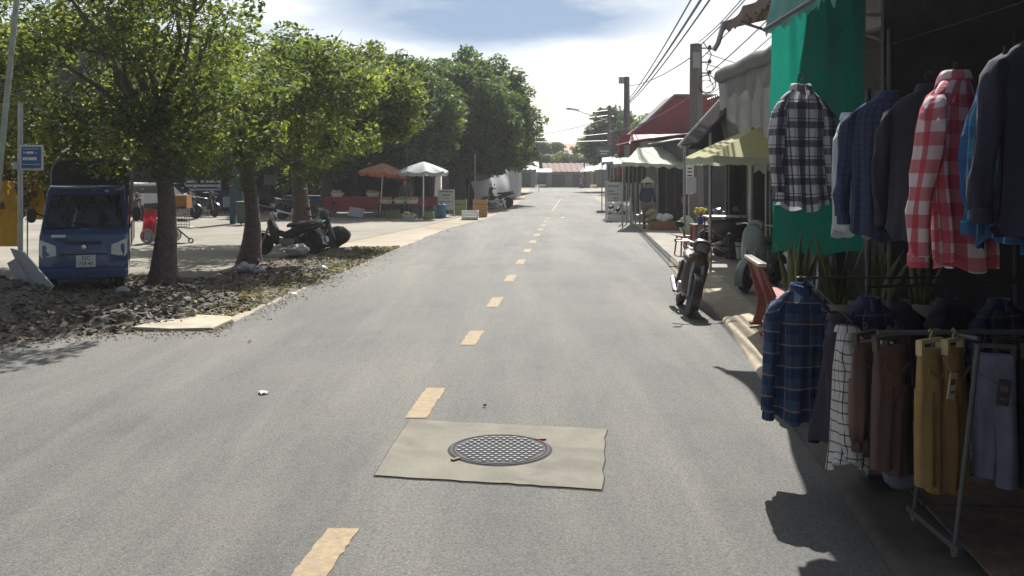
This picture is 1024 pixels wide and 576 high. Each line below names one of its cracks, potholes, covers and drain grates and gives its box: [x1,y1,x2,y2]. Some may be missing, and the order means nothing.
manhole cover [448,434,552,466]
